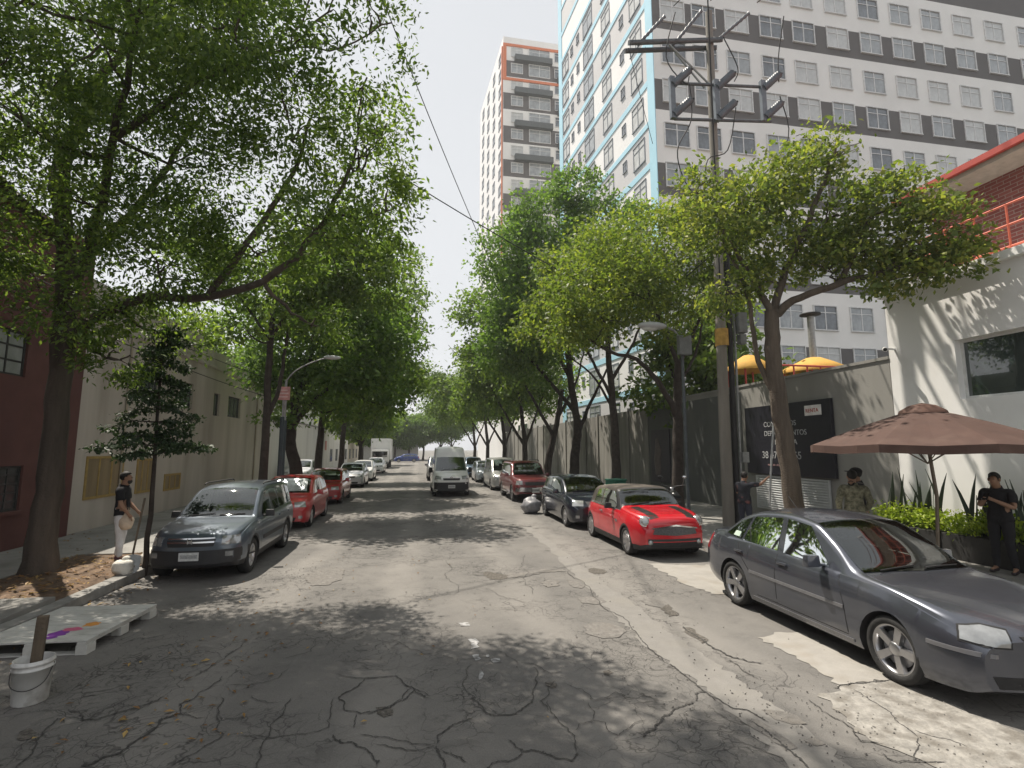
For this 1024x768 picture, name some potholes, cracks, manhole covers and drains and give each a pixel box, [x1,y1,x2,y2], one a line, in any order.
crack [810,680,964,763]
crack [15,640,705,768]
crack [683,626,760,678]
pothole [376,706,394,717]
crack [750,720,809,768]
